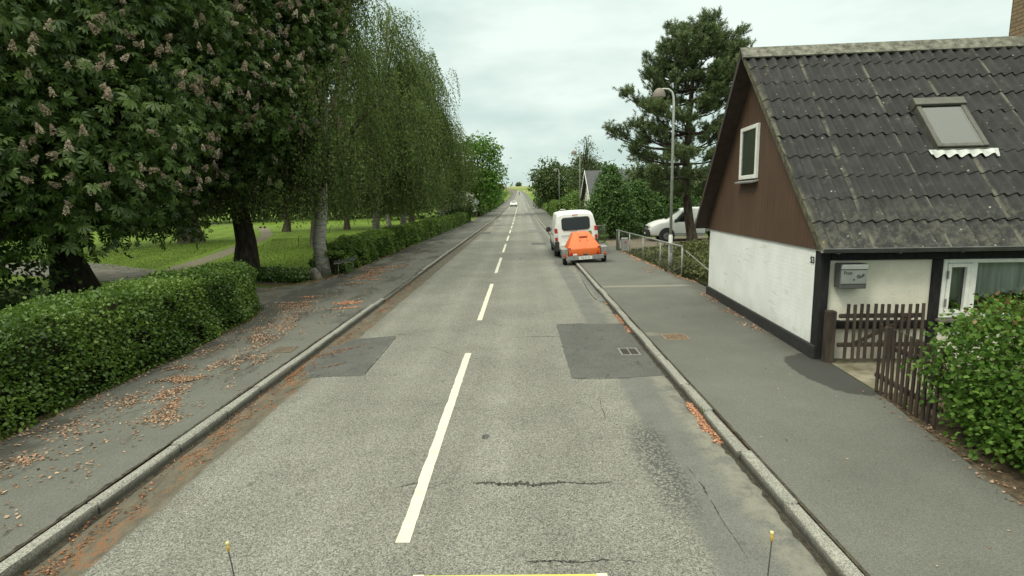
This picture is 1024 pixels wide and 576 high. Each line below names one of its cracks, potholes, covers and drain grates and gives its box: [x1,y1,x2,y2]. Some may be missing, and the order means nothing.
crack [687,467,751,563]
crack [473,480,611,488]
